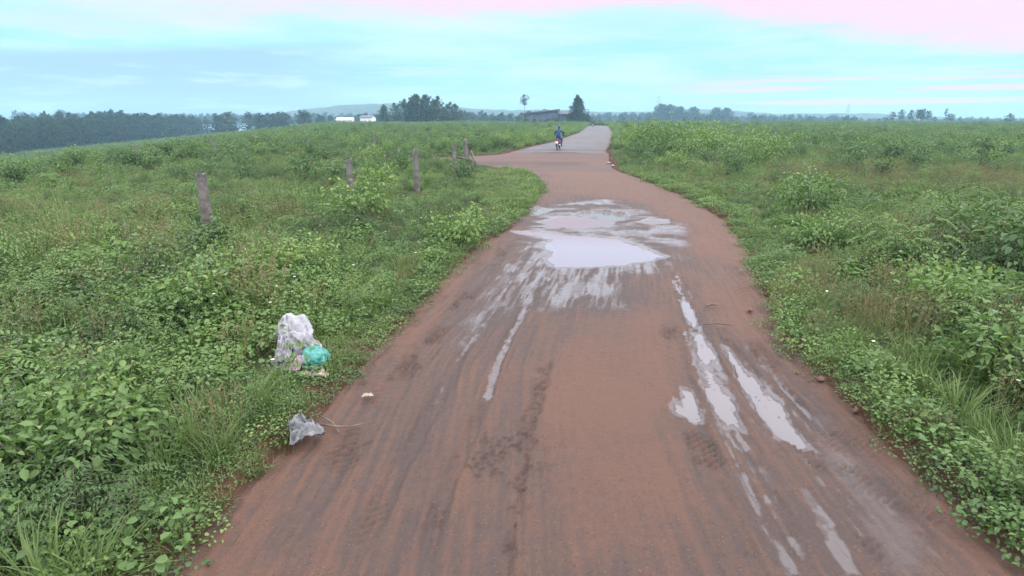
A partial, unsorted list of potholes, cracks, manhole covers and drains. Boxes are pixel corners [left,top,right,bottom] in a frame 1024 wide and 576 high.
pothole [538,215,616,229]
pothole [511,230,669,269]
pothole [577,209,631,223]
